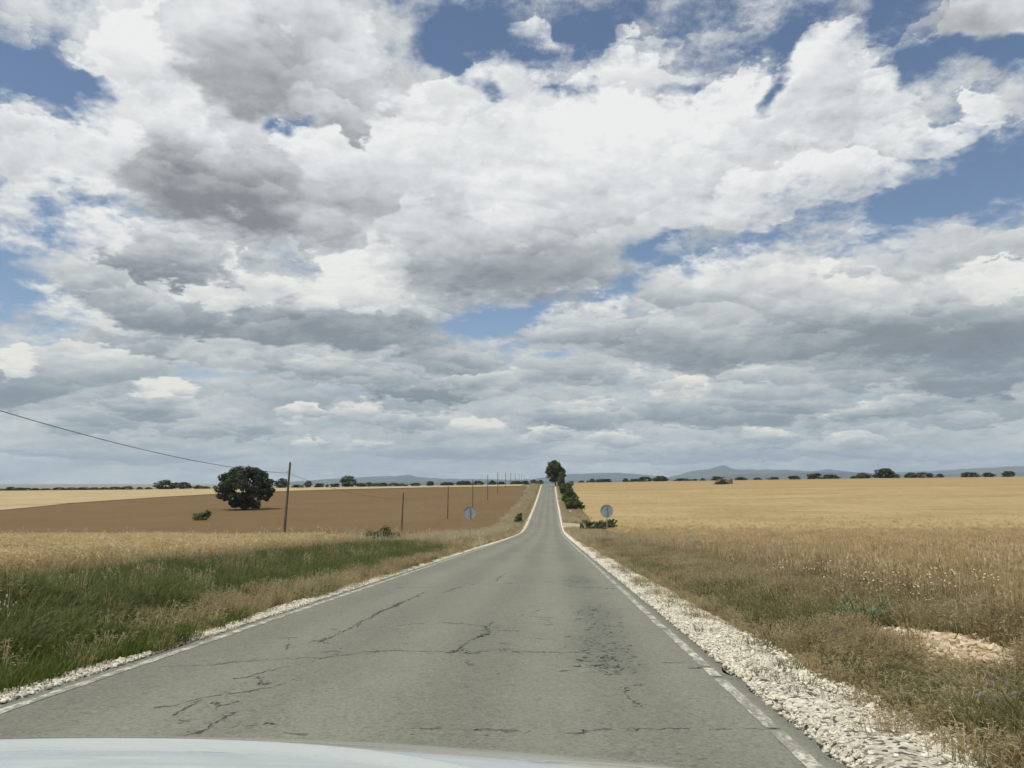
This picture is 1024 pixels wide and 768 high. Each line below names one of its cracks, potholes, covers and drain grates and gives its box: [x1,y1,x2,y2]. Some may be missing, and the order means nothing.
crack [407,727,779,736]
crack [496,573,613,594]
crack [153,583,644,736]
